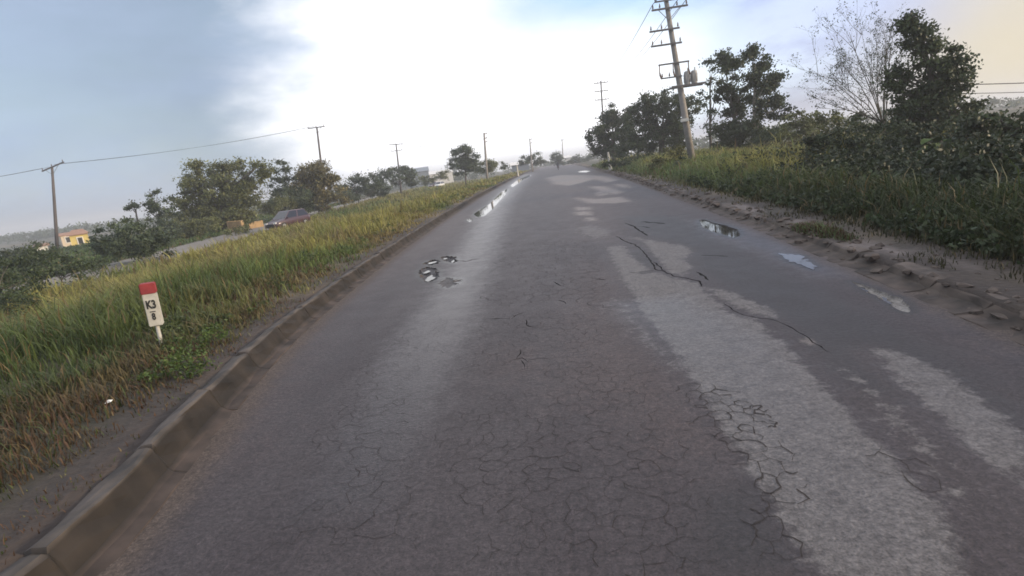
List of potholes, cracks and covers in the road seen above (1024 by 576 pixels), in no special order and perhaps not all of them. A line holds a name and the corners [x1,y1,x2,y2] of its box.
pothole [852,281,910,312]
crack [250,321,445,564]
pothole [699,219,740,238]
crack [676,382,810,560]
crack [866,446,942,492]
crack [616,222,717,287]
pothole [418,267,440,282]
